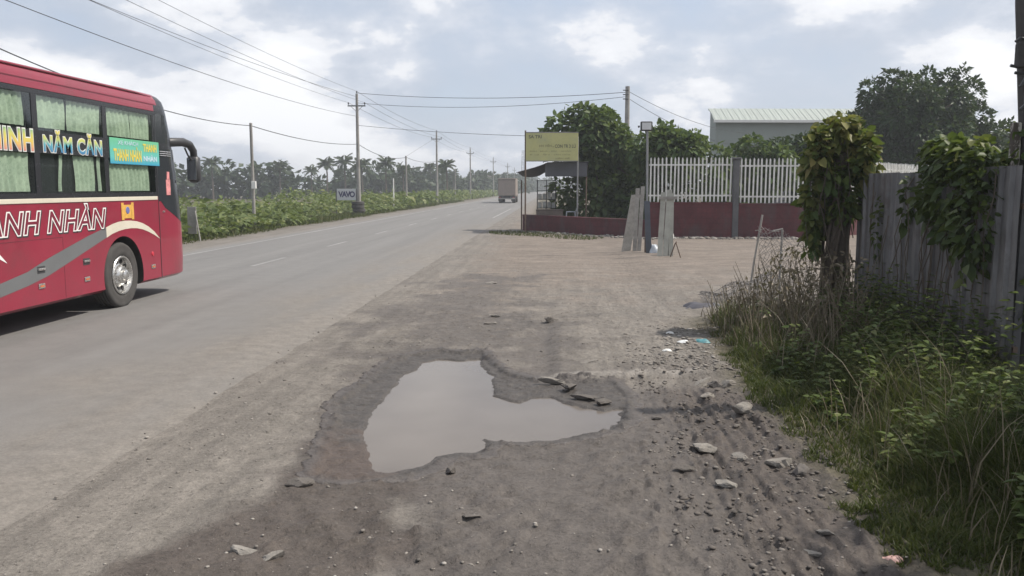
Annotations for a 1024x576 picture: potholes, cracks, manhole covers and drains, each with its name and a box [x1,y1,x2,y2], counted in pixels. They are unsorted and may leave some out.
pothole [295,346,647,485]
